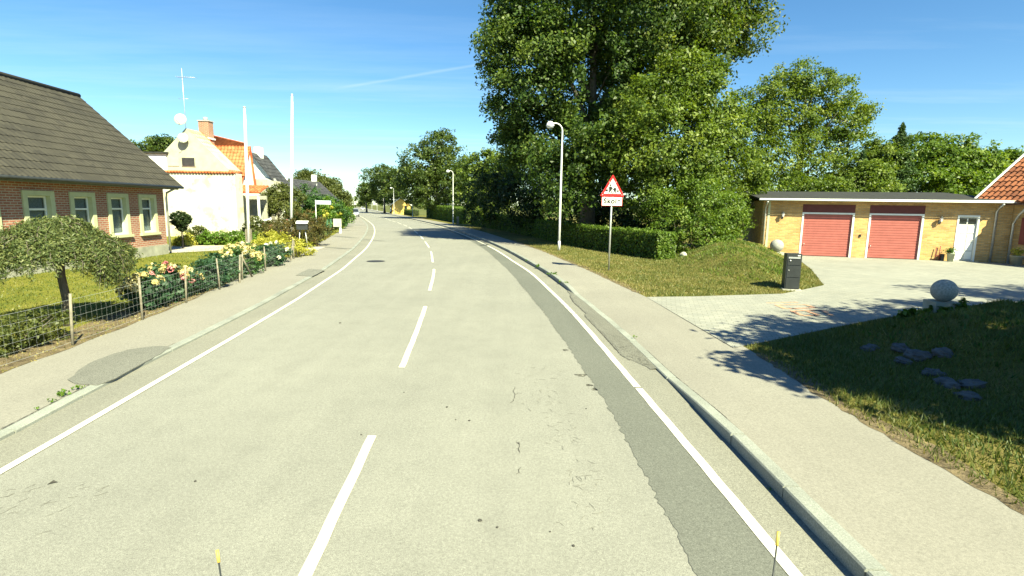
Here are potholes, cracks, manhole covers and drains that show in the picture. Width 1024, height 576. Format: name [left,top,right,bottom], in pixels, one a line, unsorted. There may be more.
crack [510,365,603,531]
crack [0,484,109,534]
